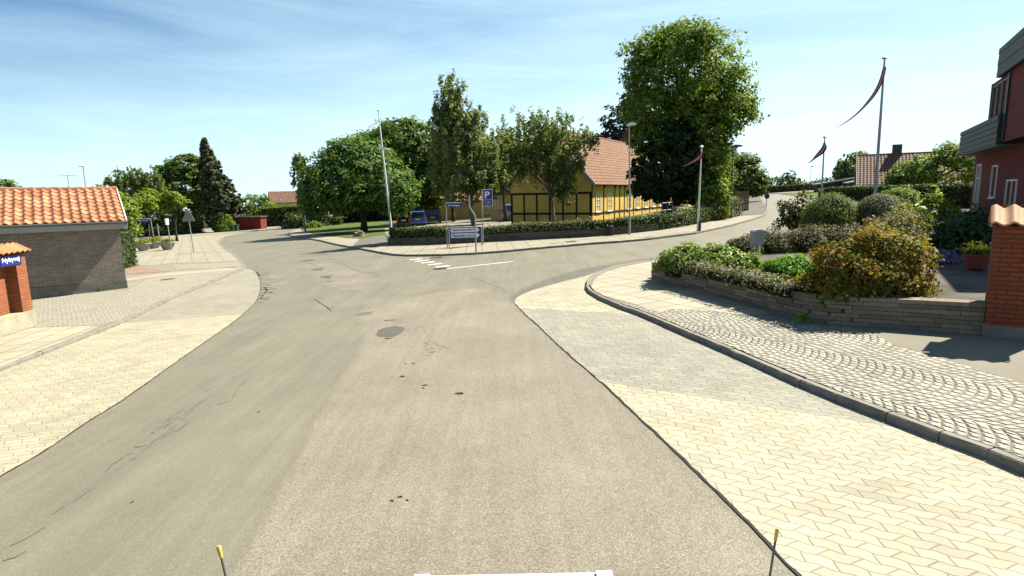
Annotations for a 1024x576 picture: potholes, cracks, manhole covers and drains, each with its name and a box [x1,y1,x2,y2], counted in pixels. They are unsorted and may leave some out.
crack [3,376,247,561]
